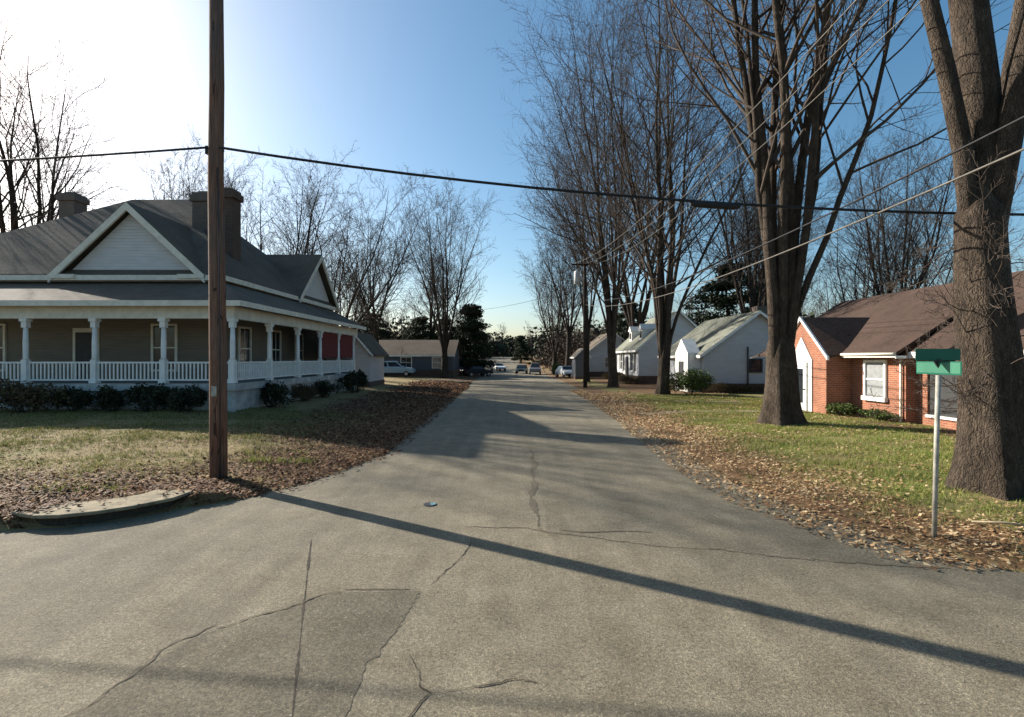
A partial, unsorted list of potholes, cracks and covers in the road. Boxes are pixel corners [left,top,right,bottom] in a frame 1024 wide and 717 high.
crack [64,542,407,717]
crack [408,654,538,717]
crack [433,450,950,583]
